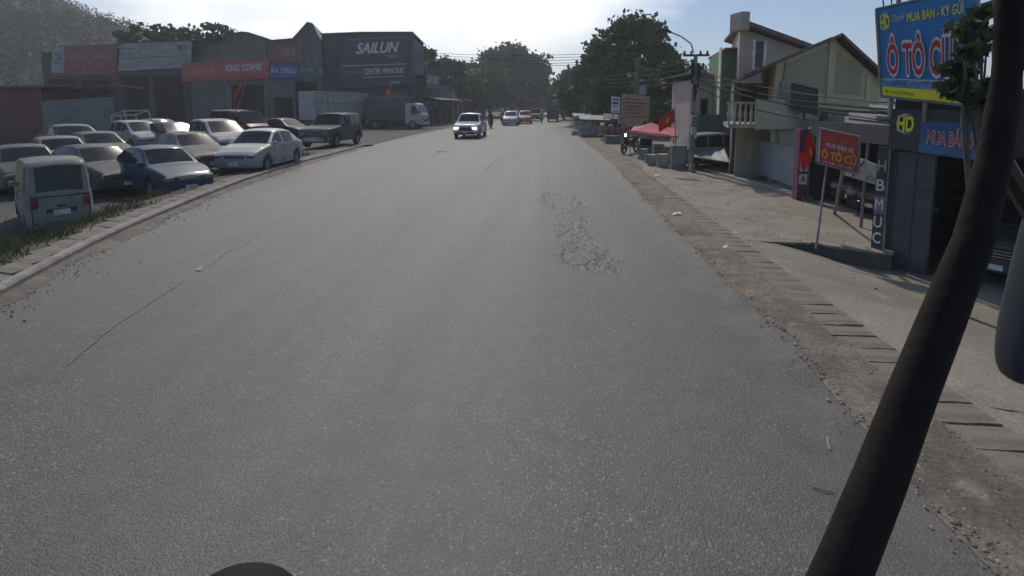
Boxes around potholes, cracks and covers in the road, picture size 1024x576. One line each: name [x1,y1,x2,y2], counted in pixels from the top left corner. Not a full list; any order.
crack [58,237,258,374]
